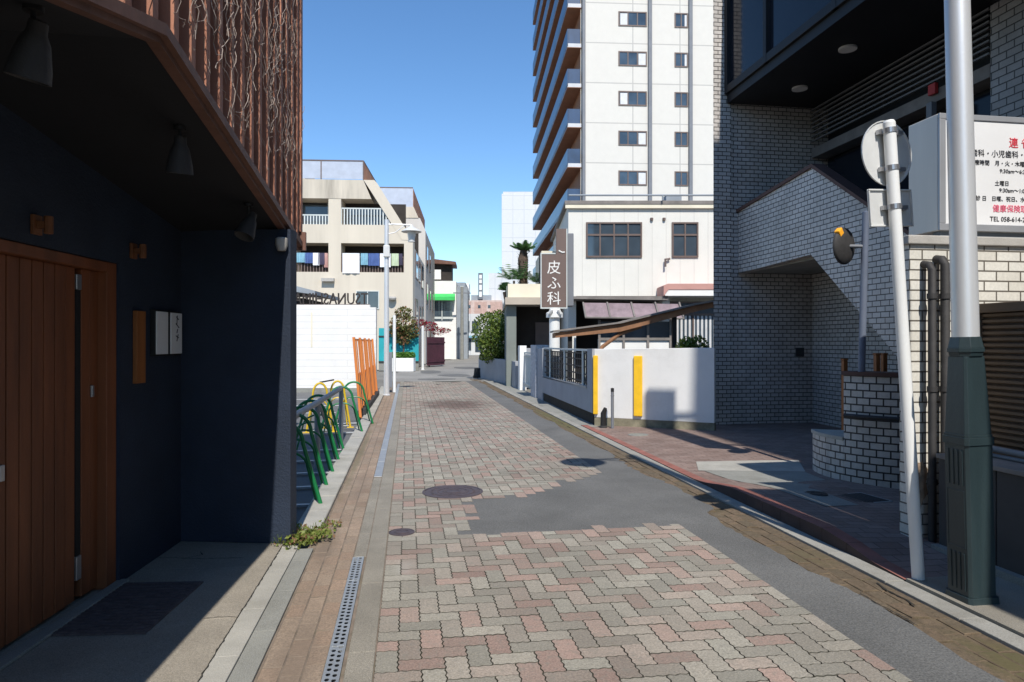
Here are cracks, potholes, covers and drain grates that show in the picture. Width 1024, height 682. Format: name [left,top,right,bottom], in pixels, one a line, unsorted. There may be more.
manhole cover [839,492,894,503]
crack [860,582,918,626]
drain grate [321,556,364,682]
manhole cover [422,485,483,499]
manhole cover [389,528,415,536]
